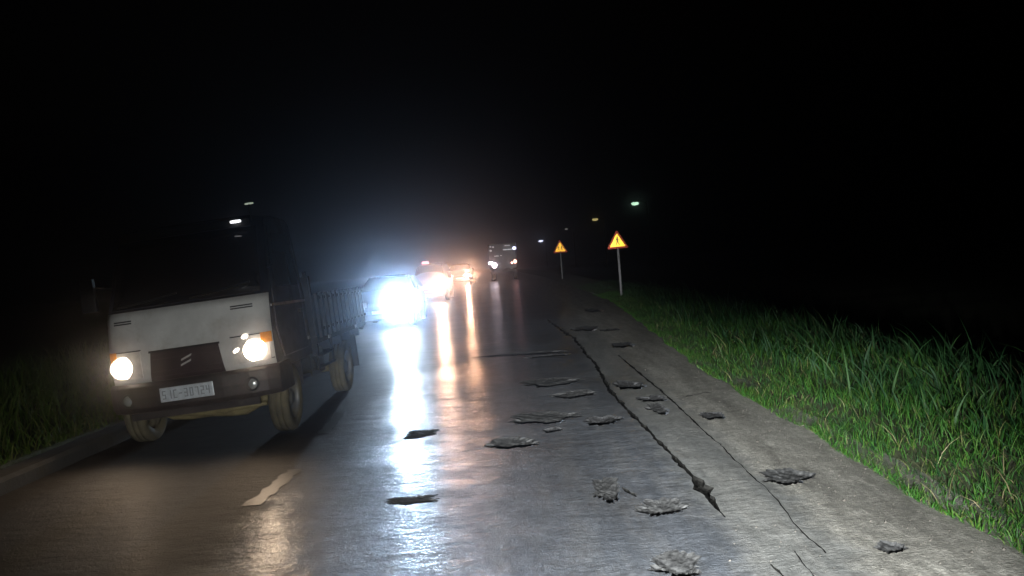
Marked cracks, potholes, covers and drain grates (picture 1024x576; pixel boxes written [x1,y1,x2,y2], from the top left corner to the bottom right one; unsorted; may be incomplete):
pothole [648,549,702,576]
pothole [873,540,908,554]
pothole [592,477,621,504]
pothole [507,411,584,425]
pothole [519,377,585,388]
crack [547,319,725,517]
pothole [612,380,647,390]
pothole [583,415,624,426]
pothole [484,436,539,450]
pothole [698,412,726,420]
pothole [549,389,598,399]
pothole [387,494,440,506]
